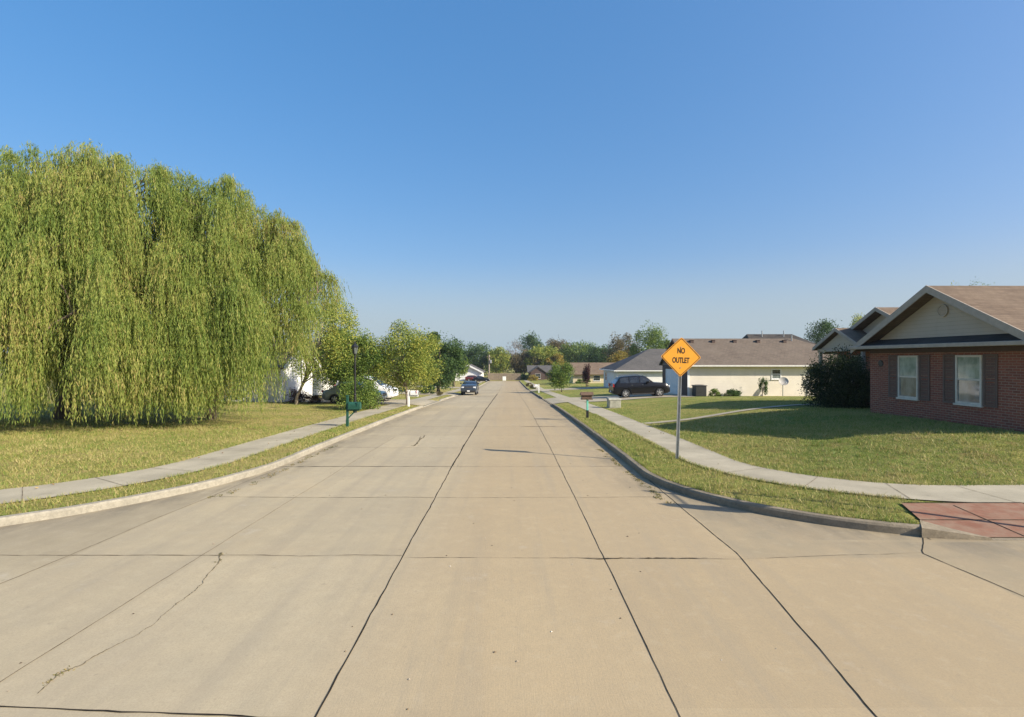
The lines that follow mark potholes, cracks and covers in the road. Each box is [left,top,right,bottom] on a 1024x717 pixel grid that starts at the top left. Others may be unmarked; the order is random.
crack [38,552,222,693]
